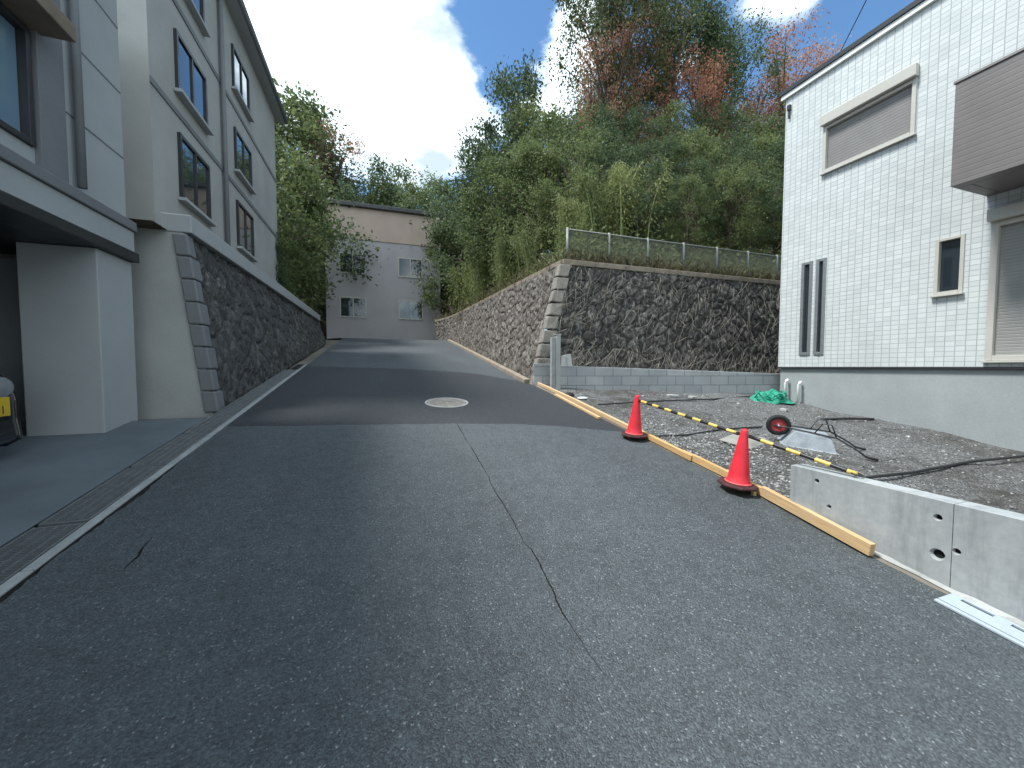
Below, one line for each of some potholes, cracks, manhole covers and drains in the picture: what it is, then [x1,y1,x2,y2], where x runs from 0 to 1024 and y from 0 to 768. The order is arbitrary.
crack [457,424,613,683]
drain grate [218,396,260,412]
manhole cover [425,398,468,408]
drain grate [0,522,86,585]
crack [0,455,188,603]
drain grate [184,411,240,434]
drain grate [38,466,164,527]
drain grate [242,385,276,397]
drain grate [131,433,210,468]
drain grate [261,376,288,385]
